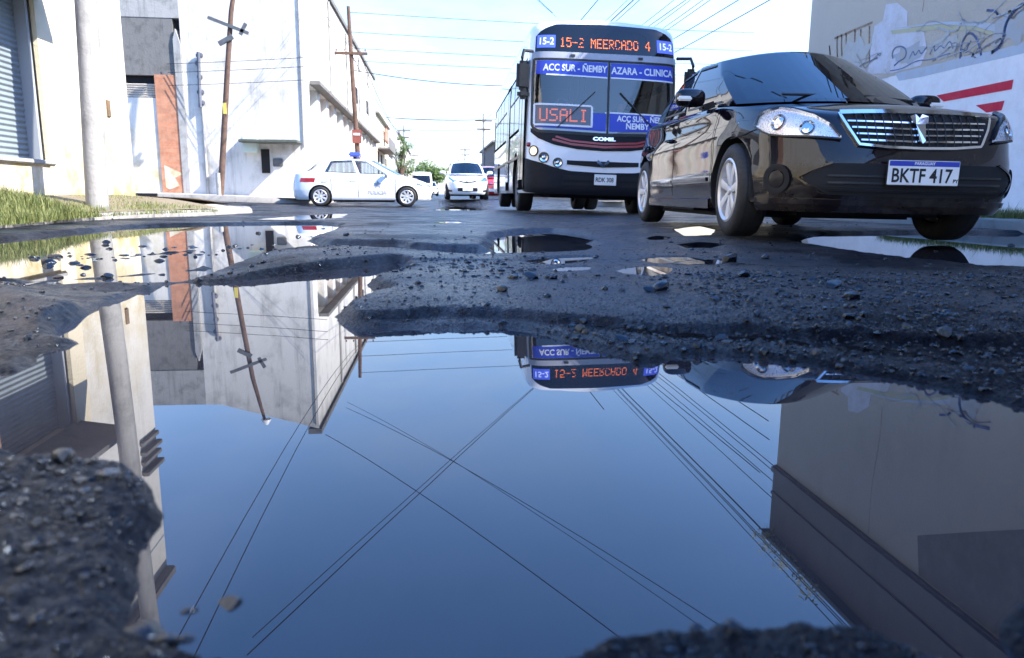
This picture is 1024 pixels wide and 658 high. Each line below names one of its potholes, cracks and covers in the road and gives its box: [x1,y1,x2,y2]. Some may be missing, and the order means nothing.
pothole [791,230,1024,266]
pothole [674,226,718,236]
pothole [0,255,1024,658]
pothole [0,221,491,285]
pothole [483,228,601,253]
